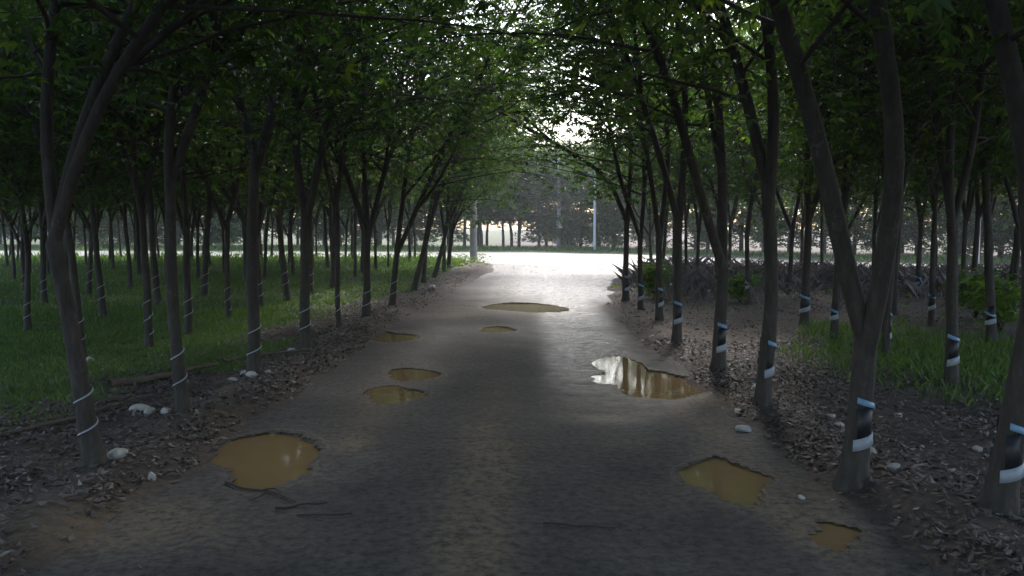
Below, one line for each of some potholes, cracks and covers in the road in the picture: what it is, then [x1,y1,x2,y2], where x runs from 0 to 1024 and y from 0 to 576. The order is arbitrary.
pothole [369,330,424,343]
pothole [477,325,519,333]
pothole [356,384,433,406]
pothole [801,516,872,555]
pothole [586,354,713,404]
pothole [477,302,574,314]
pothole [382,367,448,382]
pothole [670,453,781,509]
pothole [203,428,332,496]
